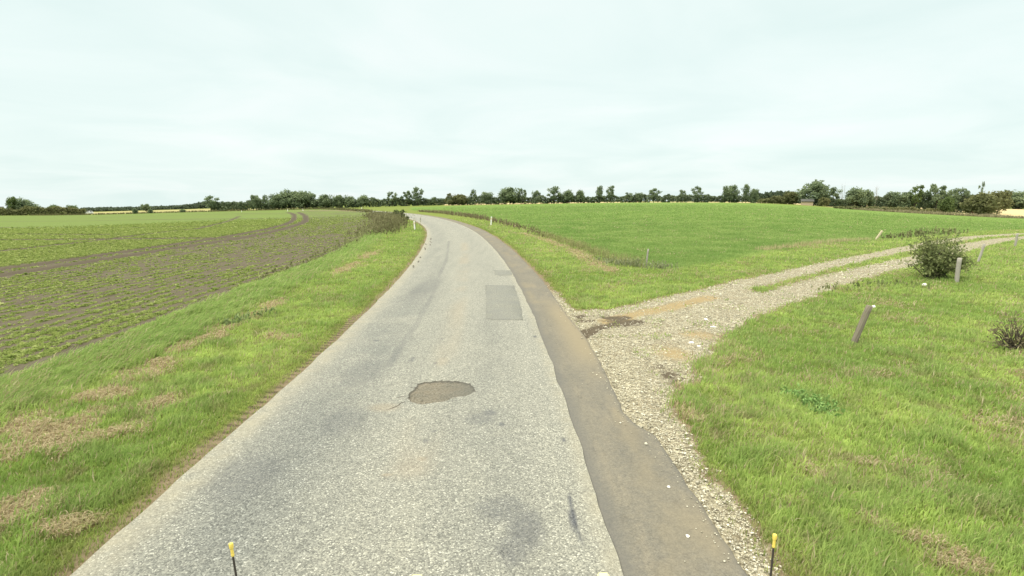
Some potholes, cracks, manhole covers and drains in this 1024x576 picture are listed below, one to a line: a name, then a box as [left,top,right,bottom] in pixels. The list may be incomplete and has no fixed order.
pothole [407,380,477,404]
